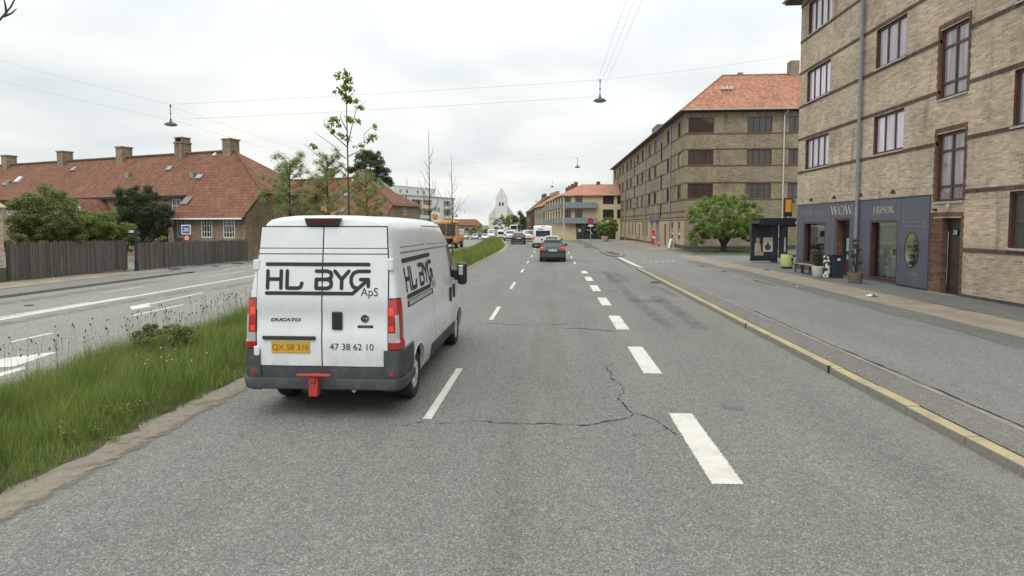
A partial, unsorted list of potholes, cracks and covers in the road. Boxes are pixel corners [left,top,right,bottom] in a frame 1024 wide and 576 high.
crack [488,364,676,436]
